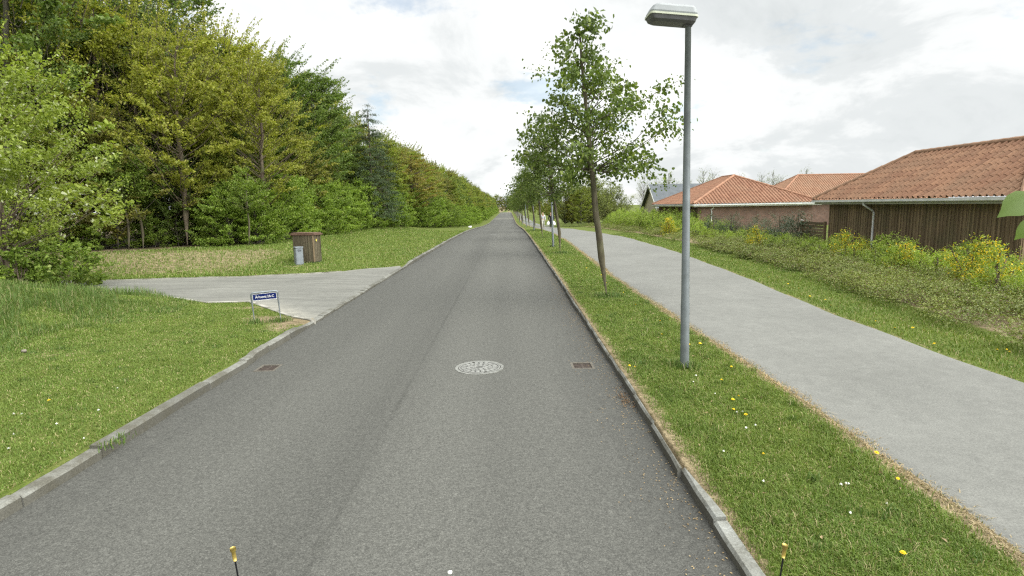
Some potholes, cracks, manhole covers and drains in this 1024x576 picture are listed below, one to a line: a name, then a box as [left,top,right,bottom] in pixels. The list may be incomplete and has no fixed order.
manhole cover [455,361,504,375]
drain grate [253,364,283,372]
